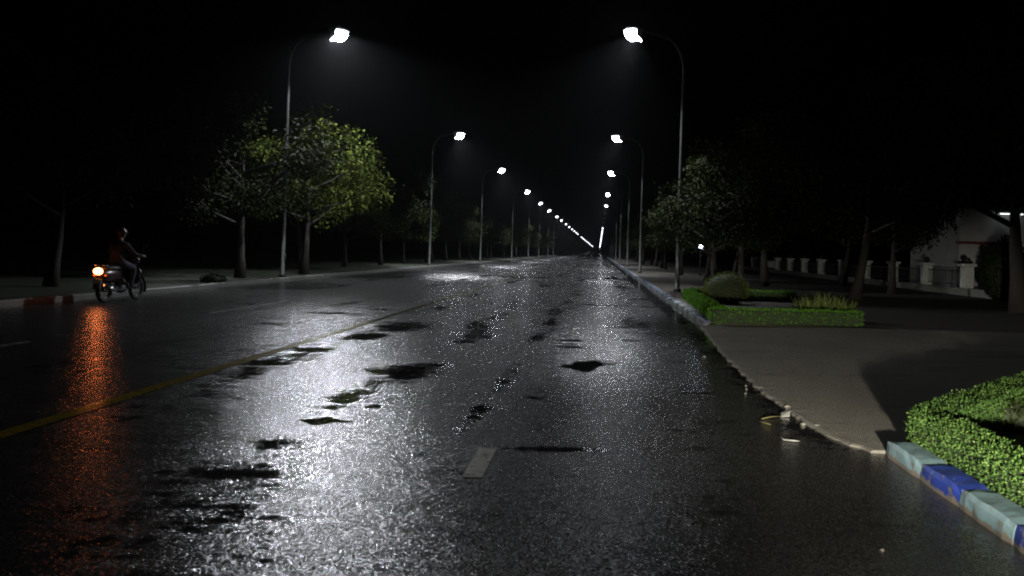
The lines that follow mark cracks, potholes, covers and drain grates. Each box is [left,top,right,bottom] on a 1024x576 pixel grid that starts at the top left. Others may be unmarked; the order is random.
pothole [299,417,353,425]
pothole [560,360,617,372]
